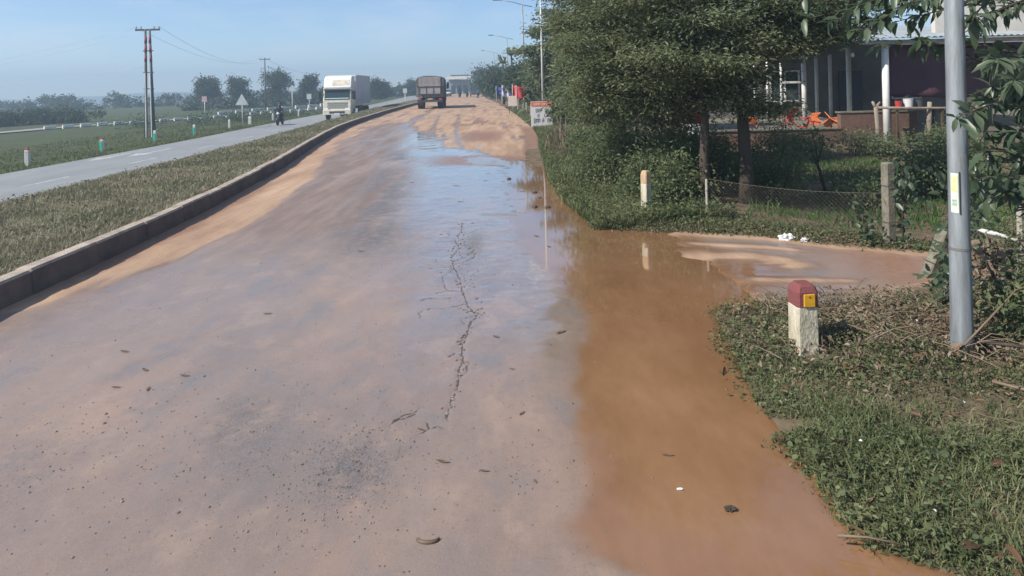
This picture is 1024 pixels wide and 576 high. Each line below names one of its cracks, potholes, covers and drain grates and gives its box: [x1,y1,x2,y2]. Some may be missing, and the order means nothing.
crack [391,222,488,434]
